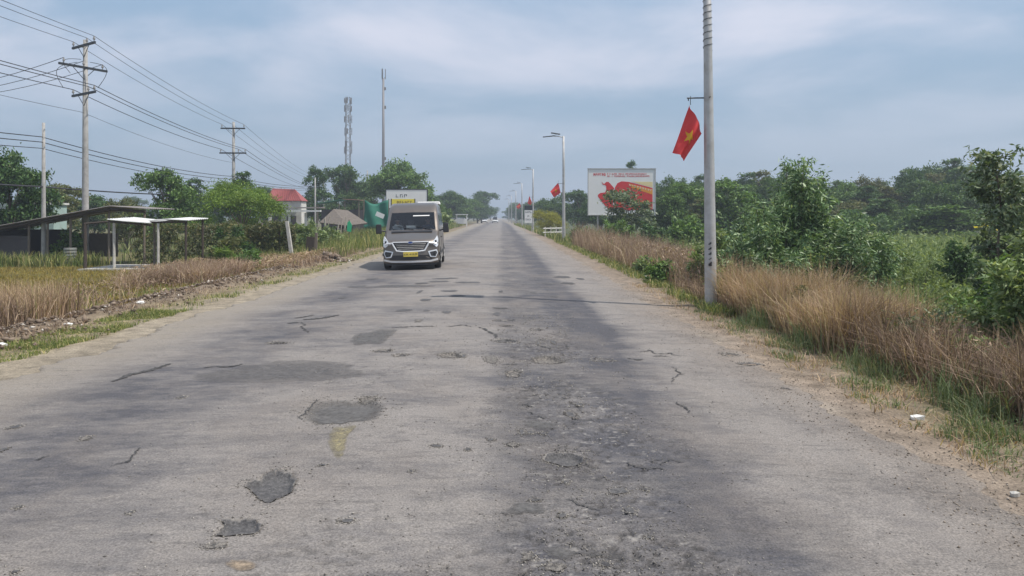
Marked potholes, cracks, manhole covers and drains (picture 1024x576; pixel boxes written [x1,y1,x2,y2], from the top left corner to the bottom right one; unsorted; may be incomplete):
pothole [532,356,564,364]
pothole [214,518,261,537]
crack [113,363,171,381]
crack [629,350,682,381]
pothole [245,469,297,503]
crack [290,315,337,332]
